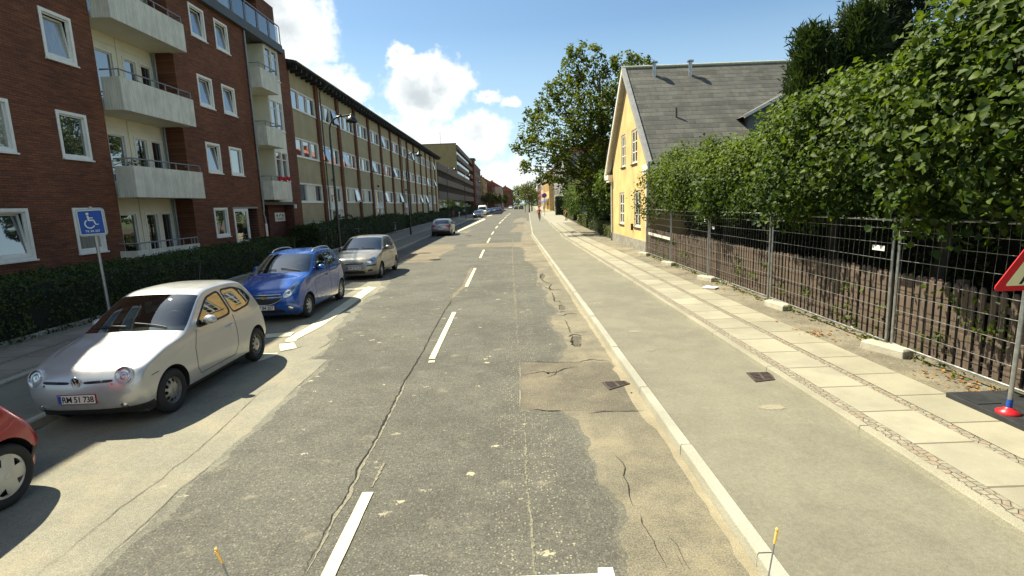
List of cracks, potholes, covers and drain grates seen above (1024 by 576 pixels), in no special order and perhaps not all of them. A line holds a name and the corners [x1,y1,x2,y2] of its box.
crack [519,265,608,411]
crack [266,267,472,574]
crack [616,456,691,571]
